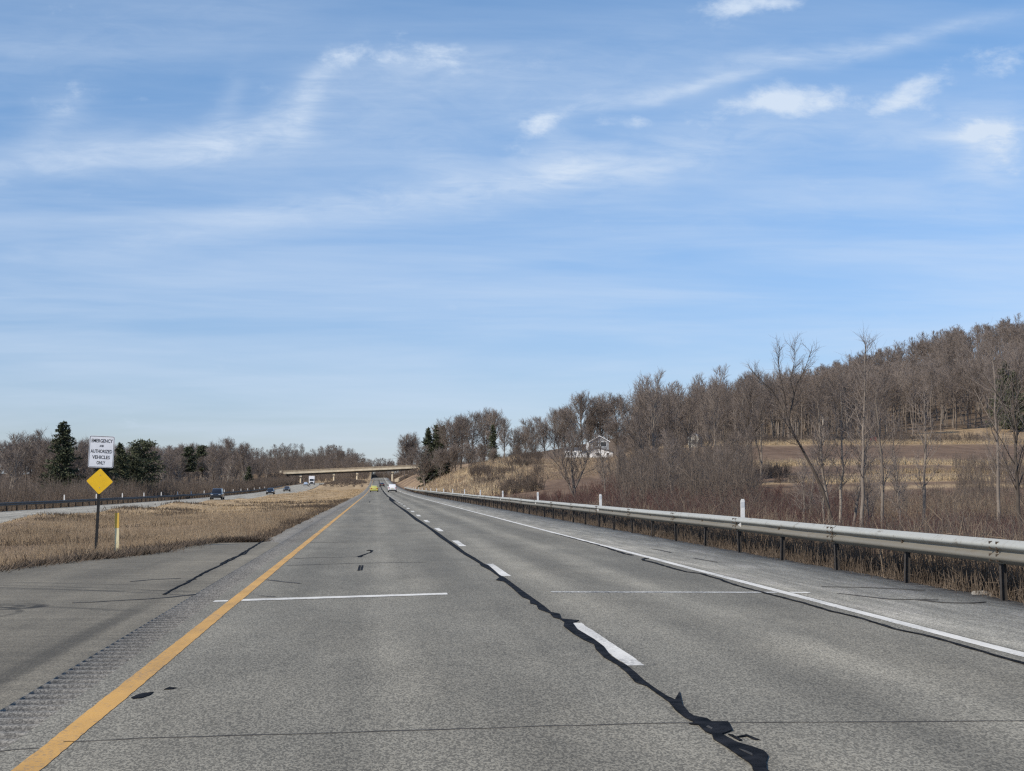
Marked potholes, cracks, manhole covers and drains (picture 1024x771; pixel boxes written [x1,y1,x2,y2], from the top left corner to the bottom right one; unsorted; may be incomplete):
crack [263,550,410,597]
